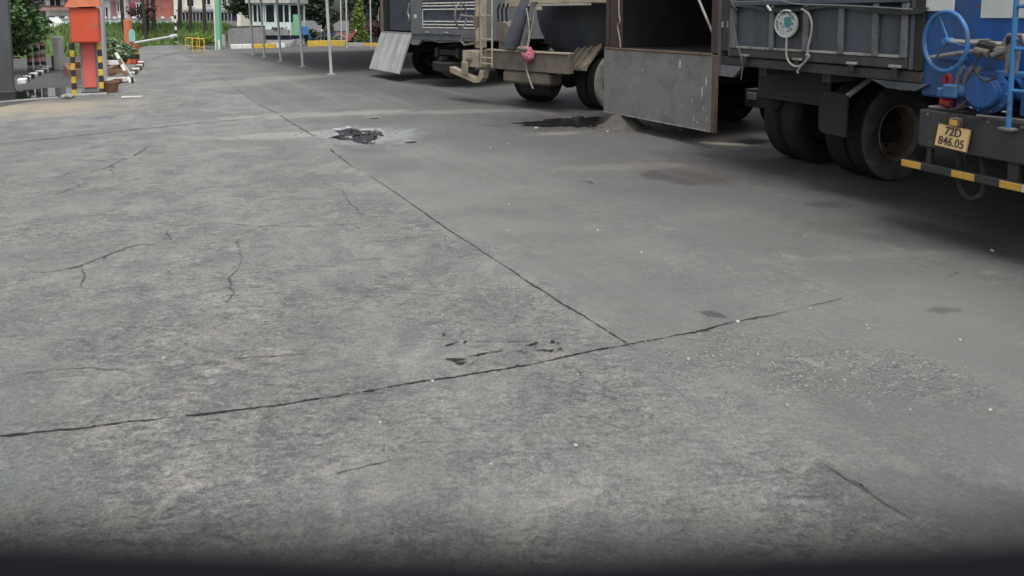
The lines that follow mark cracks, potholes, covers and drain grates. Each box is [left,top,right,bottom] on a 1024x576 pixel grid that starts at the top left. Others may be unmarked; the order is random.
pothole [323,126,387,145]
crack [0,60,842,436]
crack [818,458,906,515]
